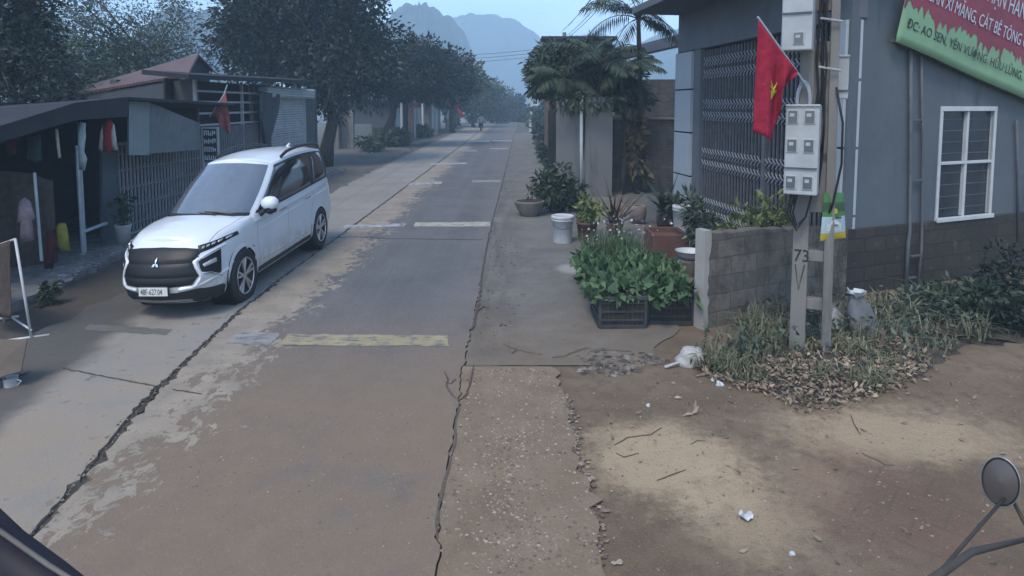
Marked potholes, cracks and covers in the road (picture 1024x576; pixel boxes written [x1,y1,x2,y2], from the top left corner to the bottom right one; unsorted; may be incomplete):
crack [32,125,630,539]
